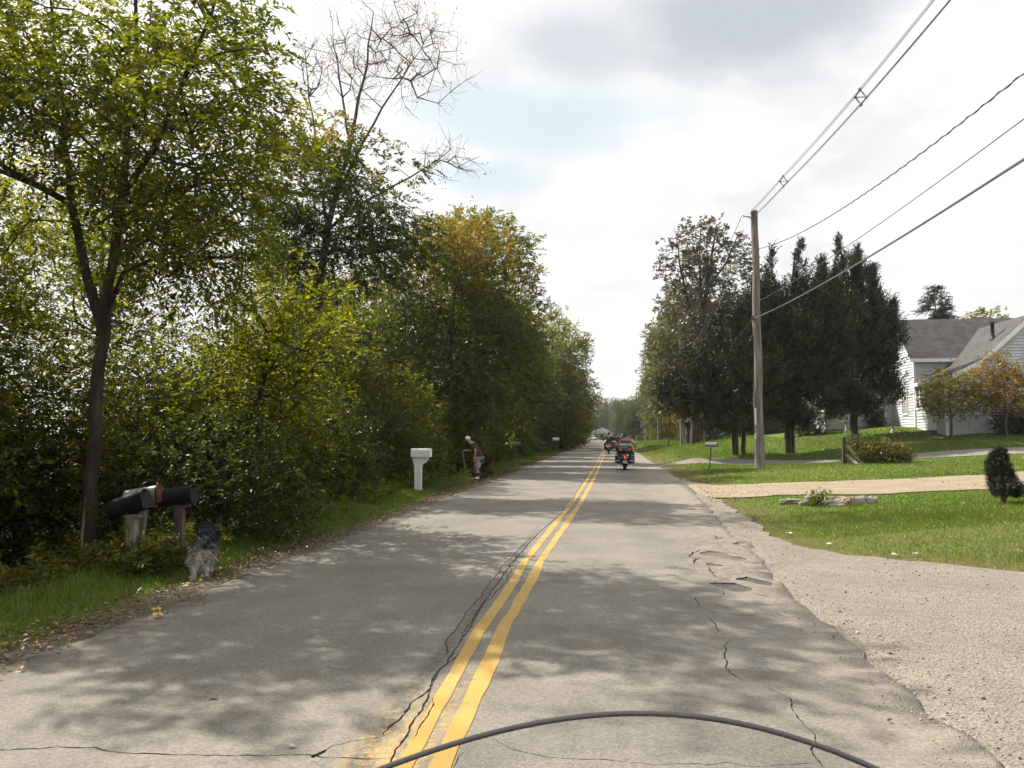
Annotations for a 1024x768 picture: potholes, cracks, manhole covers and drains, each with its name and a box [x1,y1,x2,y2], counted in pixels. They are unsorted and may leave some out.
crack [0,458,824,768]
pothole [736,576,772,586]
pothole [700,551,746,561]
pothole [709,582,752,592]
